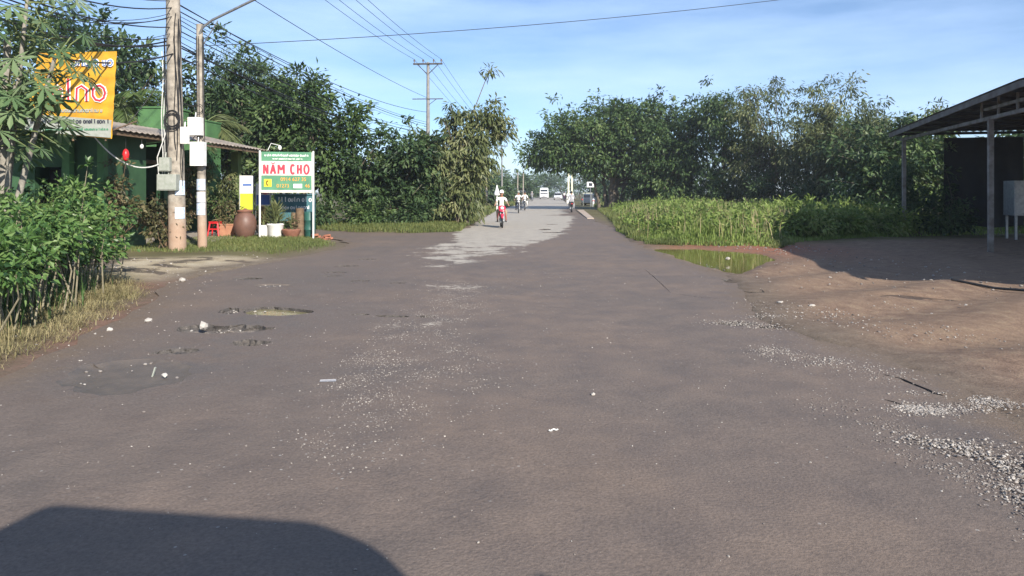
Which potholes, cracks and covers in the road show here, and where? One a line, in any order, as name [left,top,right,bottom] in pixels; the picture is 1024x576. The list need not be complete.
pothole [174,324,275,334]
crack [885,375,943,405]
pothole [243,307,314,316]
